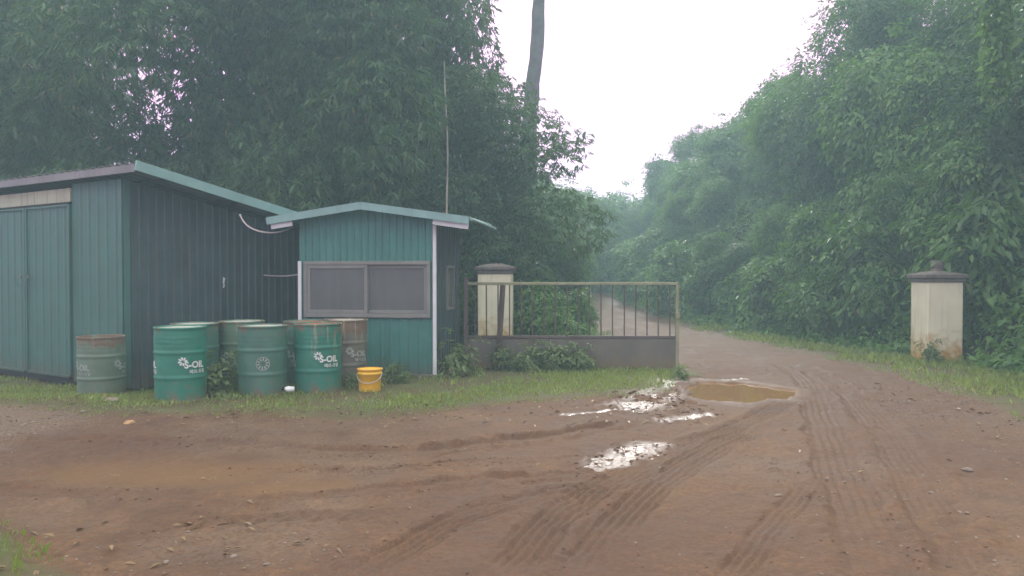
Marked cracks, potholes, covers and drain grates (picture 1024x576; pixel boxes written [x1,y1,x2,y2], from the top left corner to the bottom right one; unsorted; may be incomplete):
pothole [672,379,815,408]
